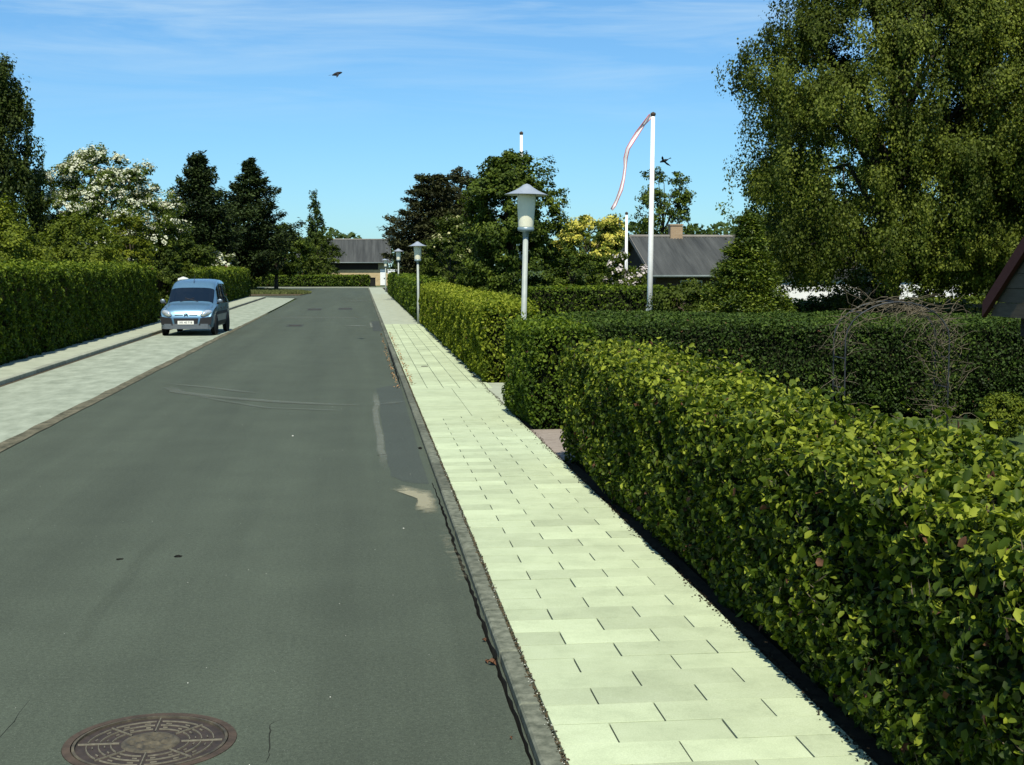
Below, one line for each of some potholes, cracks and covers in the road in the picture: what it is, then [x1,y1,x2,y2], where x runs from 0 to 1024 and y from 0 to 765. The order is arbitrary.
manhole cover [61,713,237,765]
